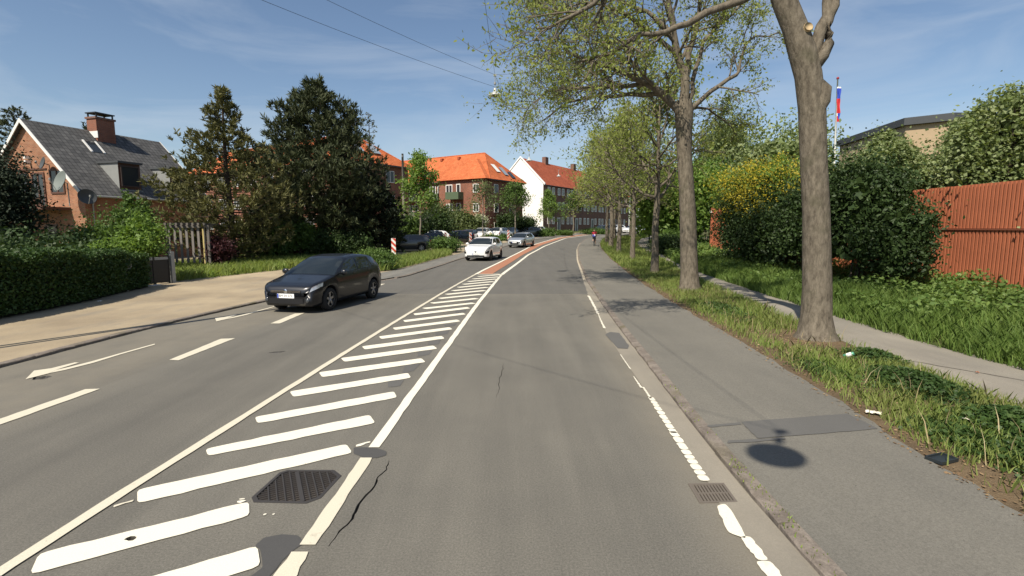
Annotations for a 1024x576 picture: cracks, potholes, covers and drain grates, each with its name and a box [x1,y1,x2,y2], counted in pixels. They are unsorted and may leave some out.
crack [329,462,389,546]
drain grate [688,483,738,504]
